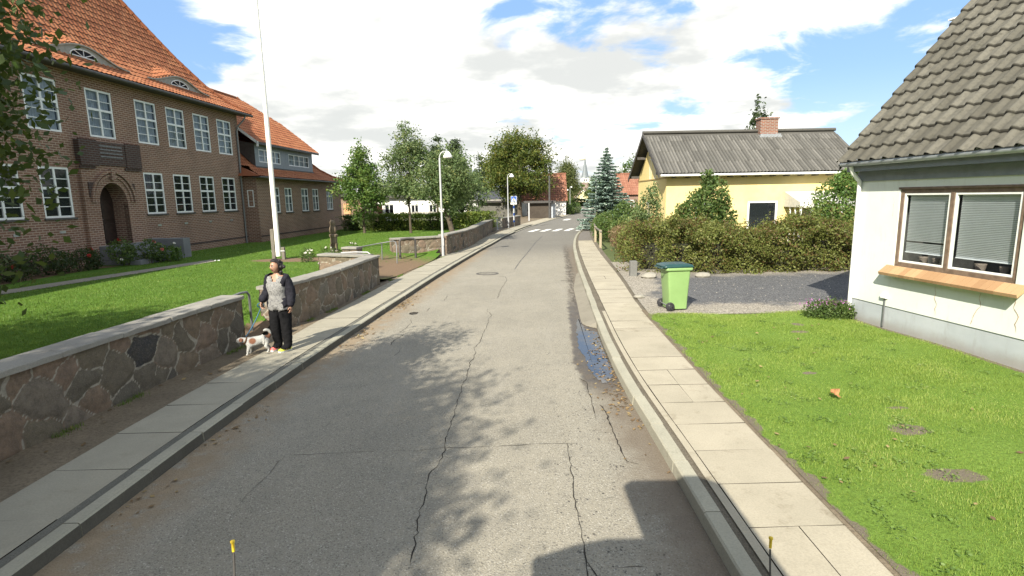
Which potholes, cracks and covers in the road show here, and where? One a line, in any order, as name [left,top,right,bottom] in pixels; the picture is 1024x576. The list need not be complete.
crack [240,311,597,576]
crack [581,379,637,464]
